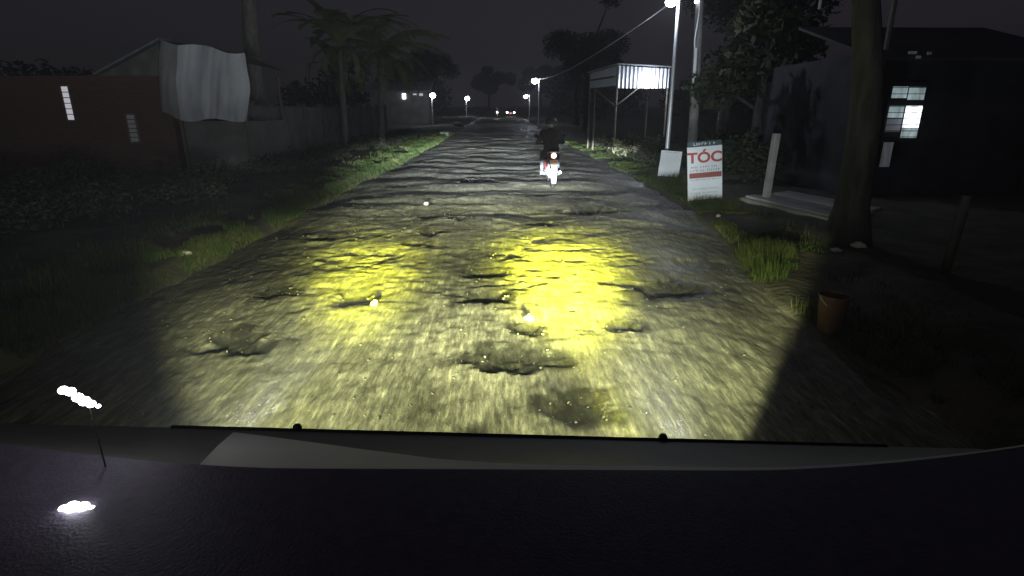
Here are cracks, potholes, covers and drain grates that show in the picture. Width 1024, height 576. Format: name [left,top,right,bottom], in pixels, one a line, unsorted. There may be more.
pothole [605,279,723,301]
pothole [453,343,578,375]
pothole [600,319,649,334]
pothole [505,323,547,337]
pothole [554,205,639,215]
pothole [414,229,448,237]
pothole [329,289,383,308]
pothole [456,290,513,304]
pothole [528,388,624,428]
pothole [183,326,286,357]
pothole [249,287,303,300]
pothole [458,268,511,280]
